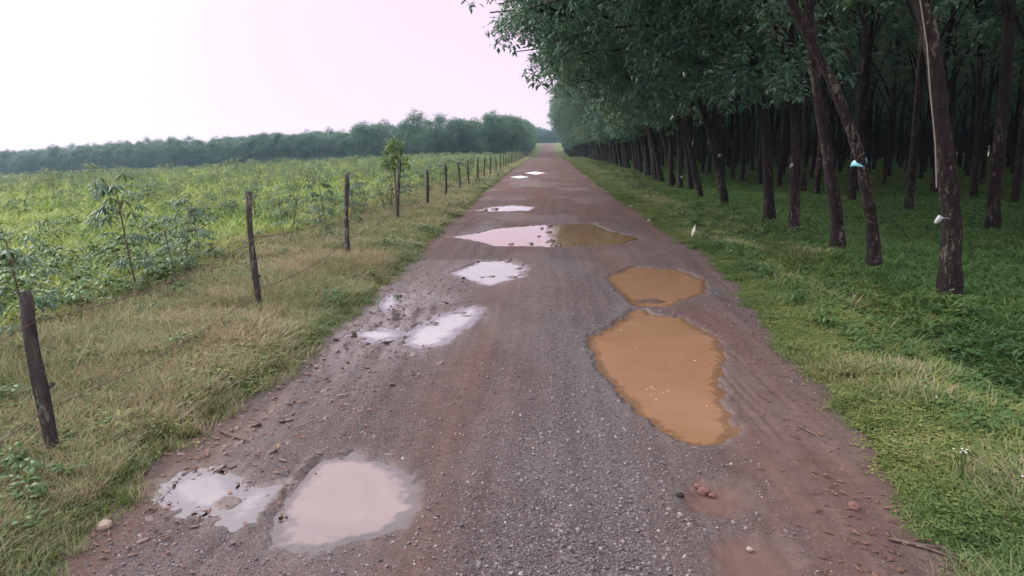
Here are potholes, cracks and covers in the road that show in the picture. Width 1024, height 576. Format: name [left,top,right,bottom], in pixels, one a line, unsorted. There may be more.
pothole [344,326,406,344]
pothole [263,449,424,557]
pothole [150,467,293,531]
pothole [448,259,530,286]
pothole [453,223,641,247]
pothole [603,266,710,307]
pothole [584,307,747,447]
pothole [399,304,487,349]
